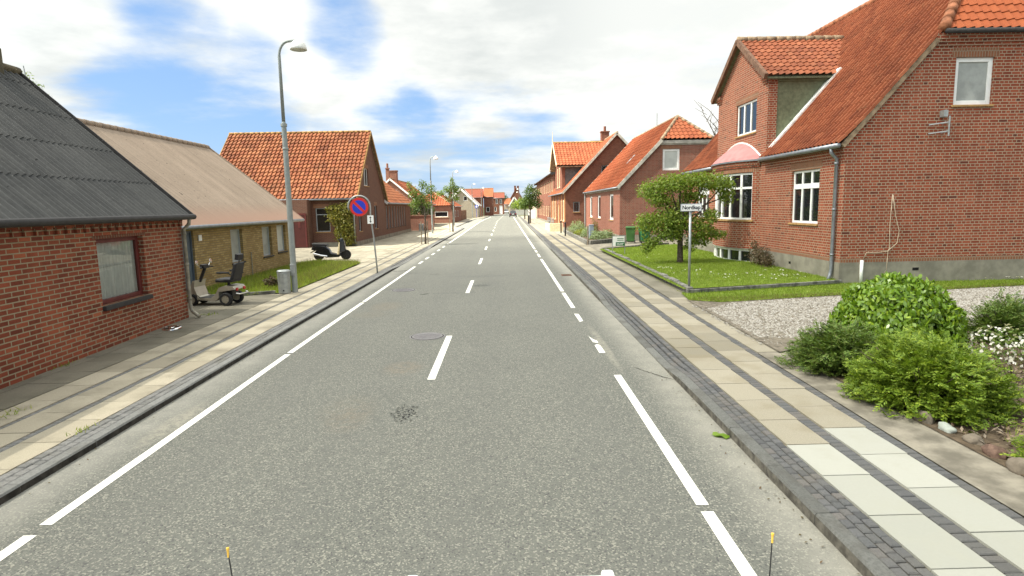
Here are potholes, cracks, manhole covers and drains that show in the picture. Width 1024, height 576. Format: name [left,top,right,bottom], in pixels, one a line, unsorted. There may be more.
manhole cover [410,332,445,340]
pothole [378,401,430,426]
